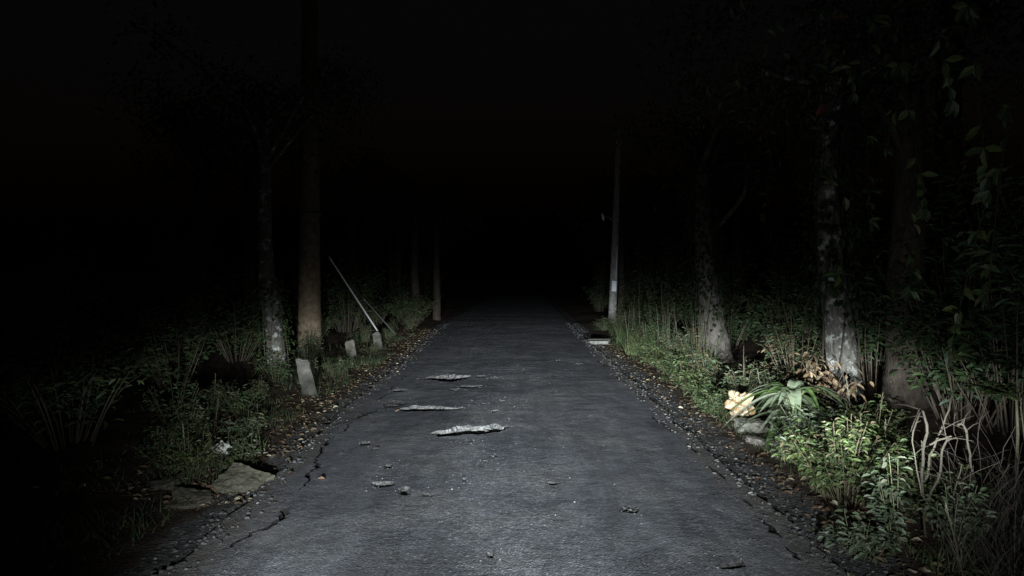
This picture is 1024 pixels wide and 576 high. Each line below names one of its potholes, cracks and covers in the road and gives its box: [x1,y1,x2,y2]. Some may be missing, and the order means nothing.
crack [217,507,291,552]
pothole [417,373,473,382]
pothole [430,423,509,437]
crack [739,498,802,561]
crack [299,376,407,490]
